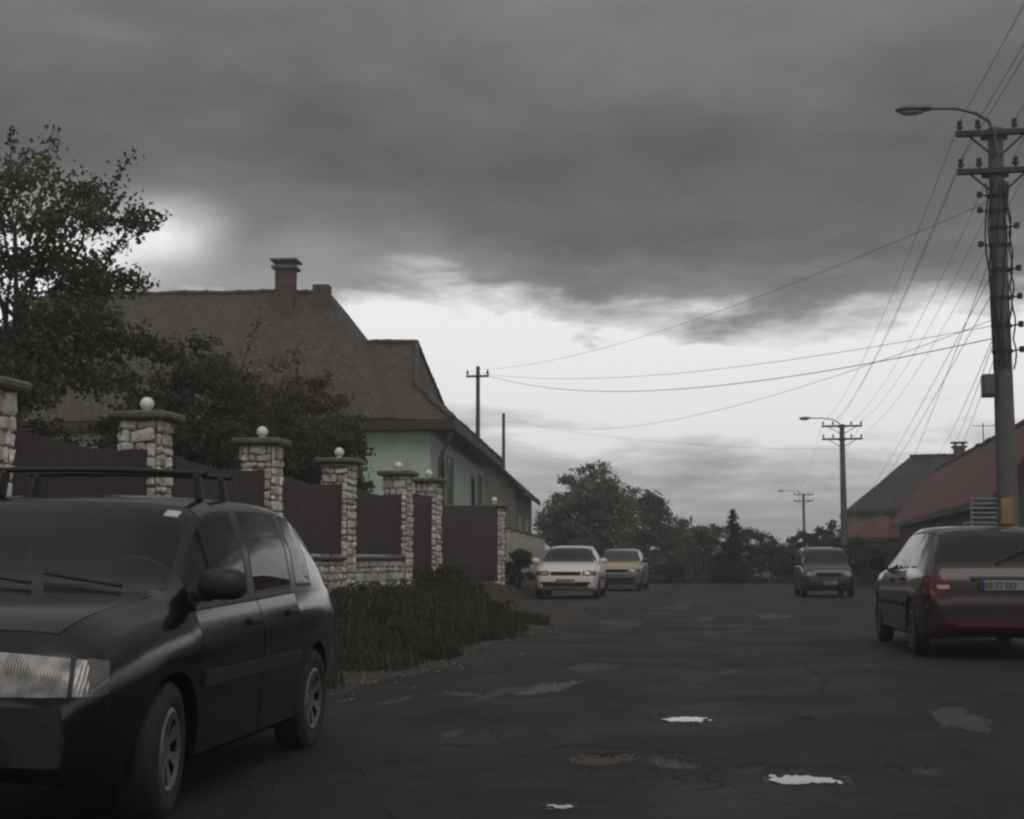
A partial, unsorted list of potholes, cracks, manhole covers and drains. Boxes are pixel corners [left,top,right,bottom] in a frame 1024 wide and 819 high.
pothole [538,802,578,810]
pothole [759,771,854,786]
crack [520,744,892,791]
pothole [649,715,715,723]
